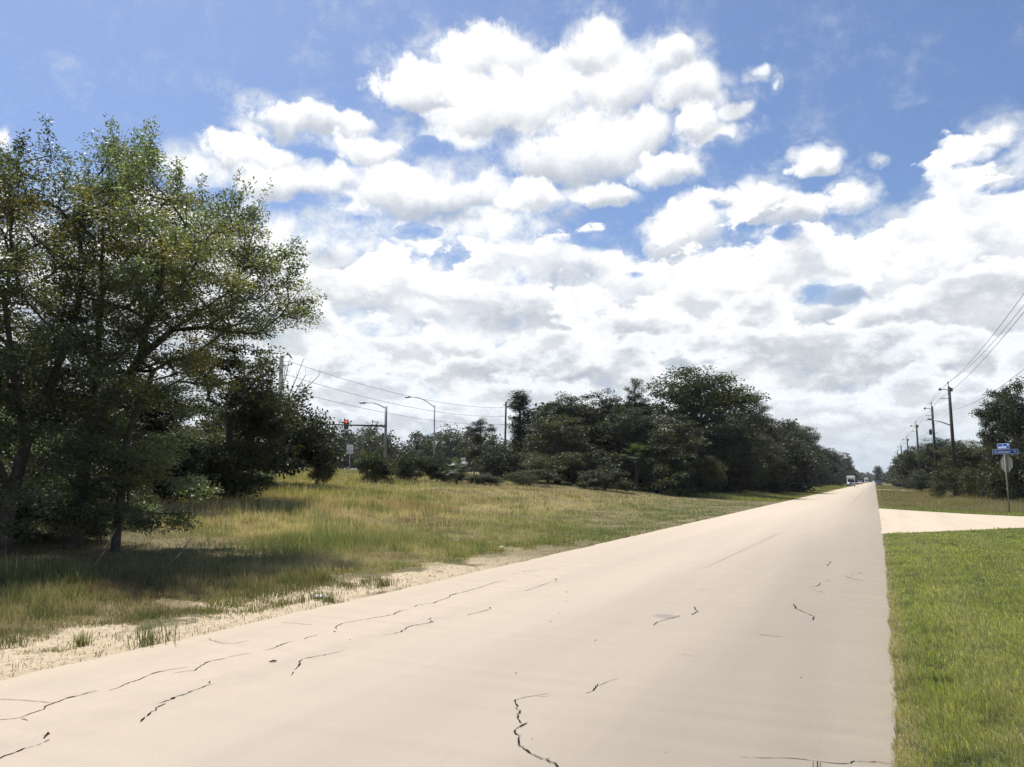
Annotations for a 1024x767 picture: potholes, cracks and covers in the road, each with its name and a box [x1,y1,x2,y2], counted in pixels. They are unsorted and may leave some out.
crack [752,757,893,767]
crack [334,582,494,635]
crack [514,694,559,767]
crack [0,638,248,722]
